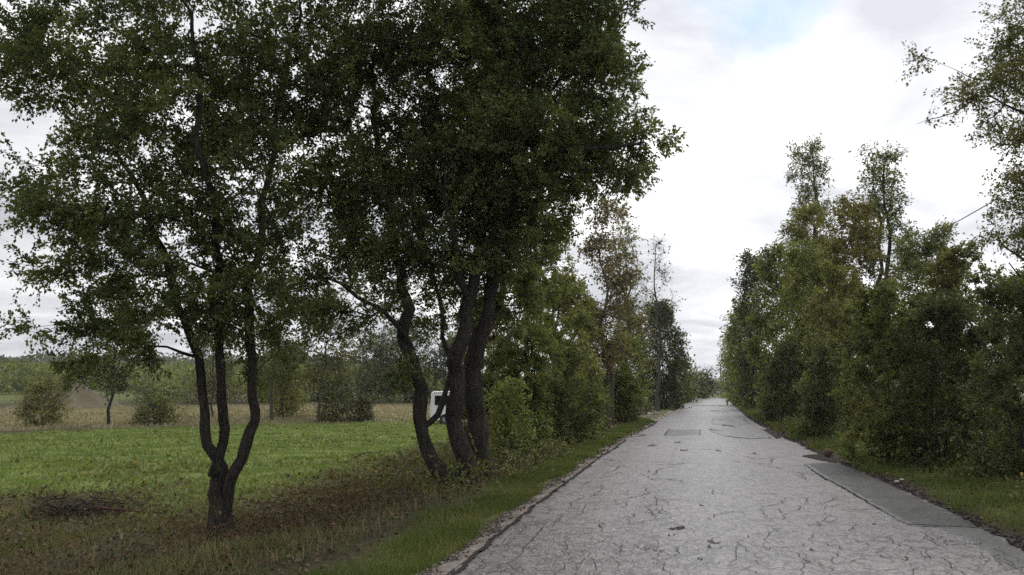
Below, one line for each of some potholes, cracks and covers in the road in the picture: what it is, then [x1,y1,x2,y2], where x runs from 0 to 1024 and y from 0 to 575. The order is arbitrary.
crack [450,420,1023,575]
